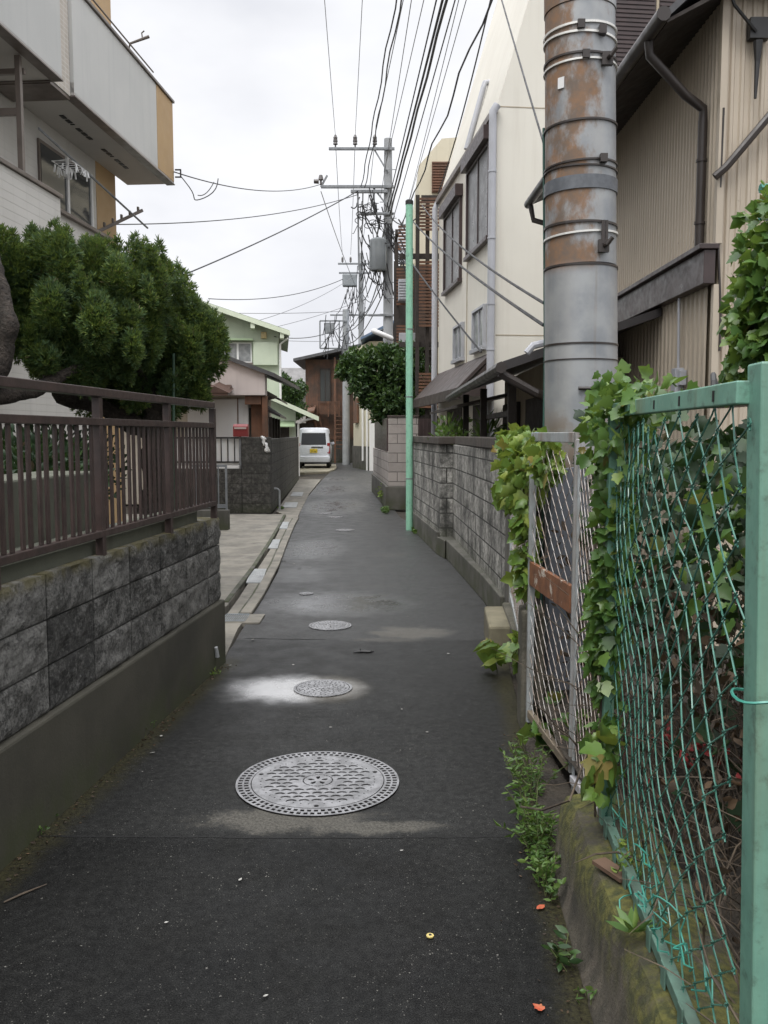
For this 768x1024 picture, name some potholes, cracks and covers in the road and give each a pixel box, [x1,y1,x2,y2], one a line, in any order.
manhole cover [309,621,351,631]
manhole cover [235,751,399,817]
manhole cover [293,679,352,697]
